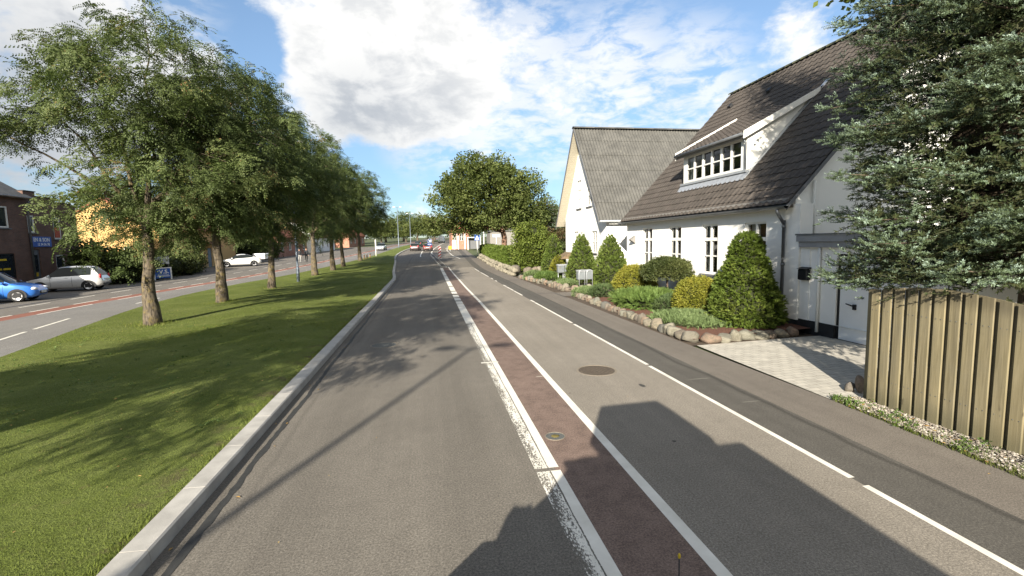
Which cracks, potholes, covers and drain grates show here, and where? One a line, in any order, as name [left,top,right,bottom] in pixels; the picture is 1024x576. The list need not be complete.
manhole cover [577,365,617,376]
manhole cover [545,432,565,440]
